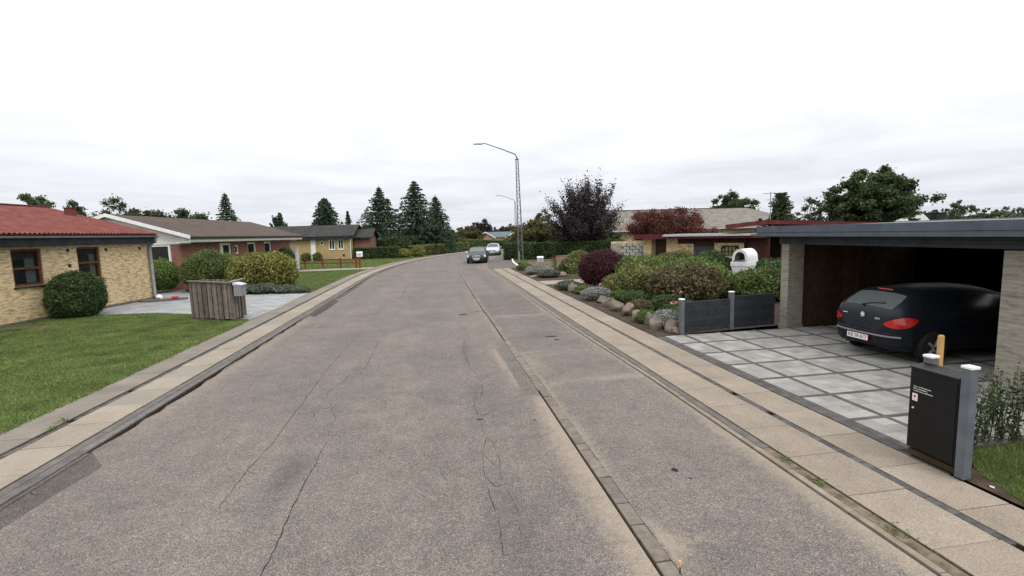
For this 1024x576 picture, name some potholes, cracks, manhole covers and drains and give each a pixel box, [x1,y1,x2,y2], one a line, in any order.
crack [463,343,522,557]
crack [0,317,379,524]
crack [261,442,327,576]
